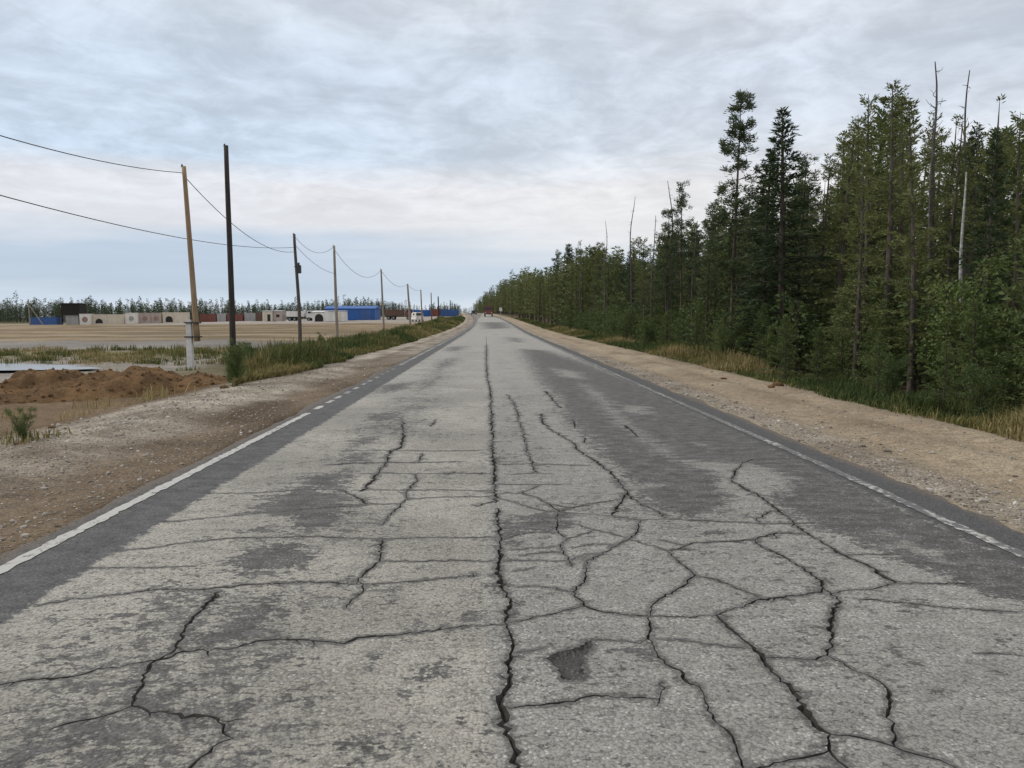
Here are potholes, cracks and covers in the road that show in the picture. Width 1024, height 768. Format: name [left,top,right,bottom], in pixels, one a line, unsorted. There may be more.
pothole [545,640,594,681]
crack [0,338,1024,768]
